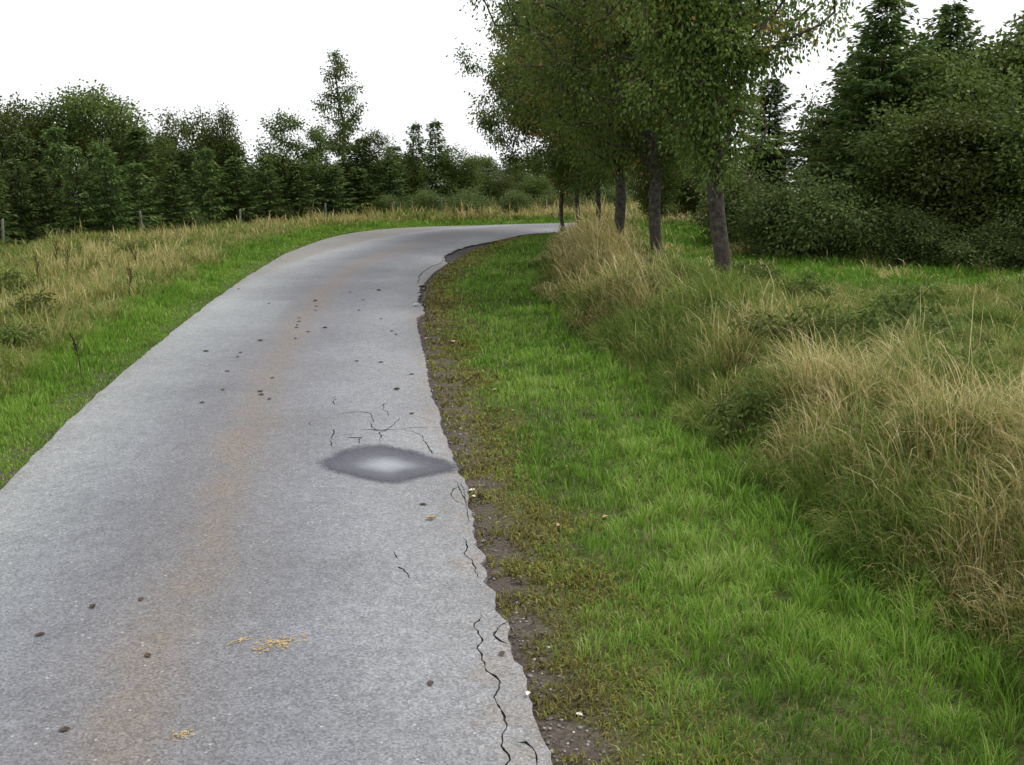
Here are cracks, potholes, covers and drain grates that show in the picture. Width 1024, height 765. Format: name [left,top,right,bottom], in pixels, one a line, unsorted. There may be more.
crack [473,615,538,765]
crack [330,405,433,453]
